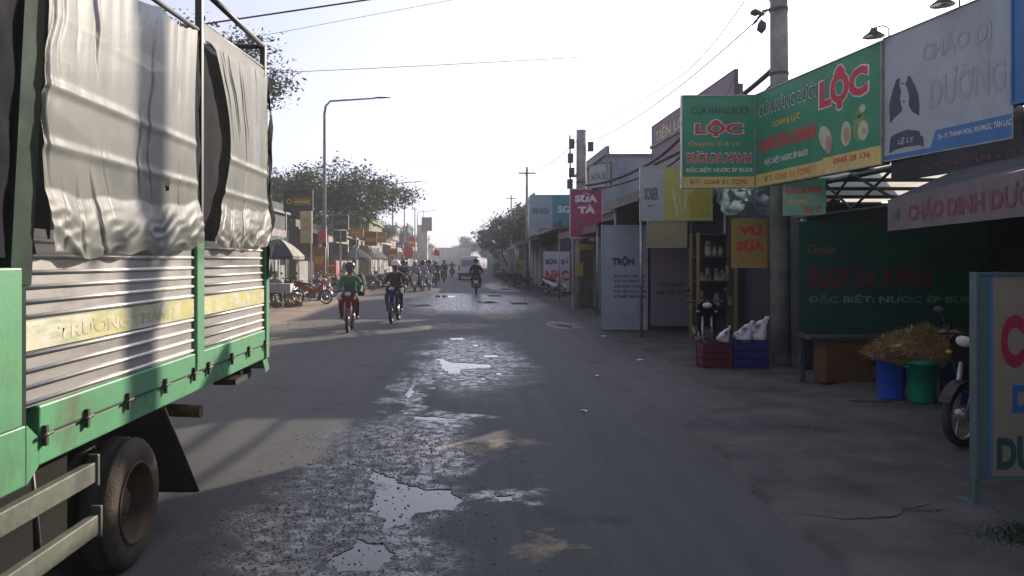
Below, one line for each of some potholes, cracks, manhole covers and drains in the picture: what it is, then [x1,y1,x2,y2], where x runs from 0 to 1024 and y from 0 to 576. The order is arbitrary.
crack [801,504,947,519]
pothole [327,538,396,572]
pothole [364,466,465,530]
pothole [436,358,495,374]
